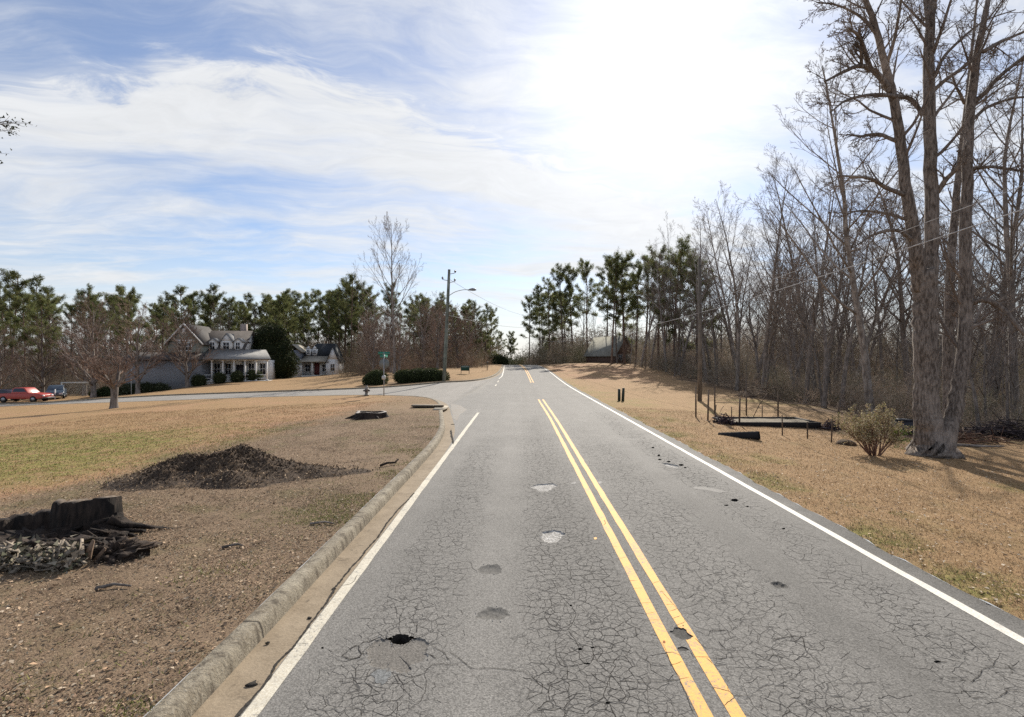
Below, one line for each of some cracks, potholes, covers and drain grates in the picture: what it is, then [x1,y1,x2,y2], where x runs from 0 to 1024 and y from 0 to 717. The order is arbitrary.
pothole [670,627,693,640]
pothole [475,607,510,620]
pothole [390,634,411,645]
crack [288,412,1024,717]
pothole [477,564,502,574]
